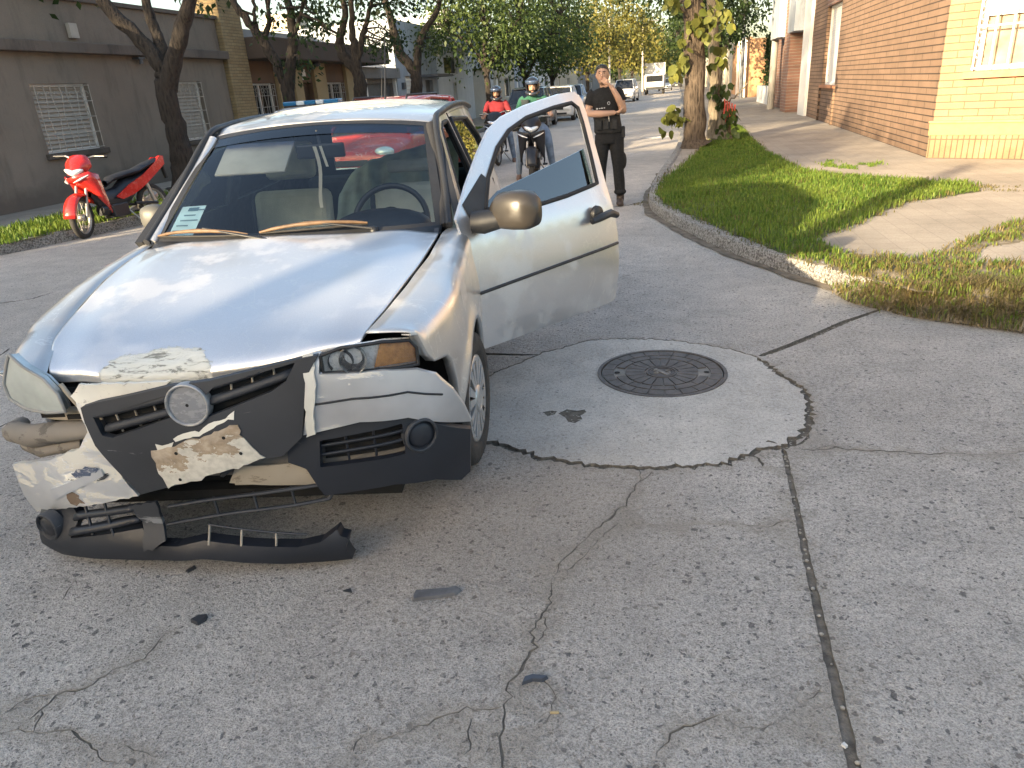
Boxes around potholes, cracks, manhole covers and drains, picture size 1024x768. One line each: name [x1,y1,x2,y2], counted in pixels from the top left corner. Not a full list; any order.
crack [353,338,1018,768]
pothole [558,409,586,423]
crack [0,635,164,764]
manhole cover [598,350,728,397]
